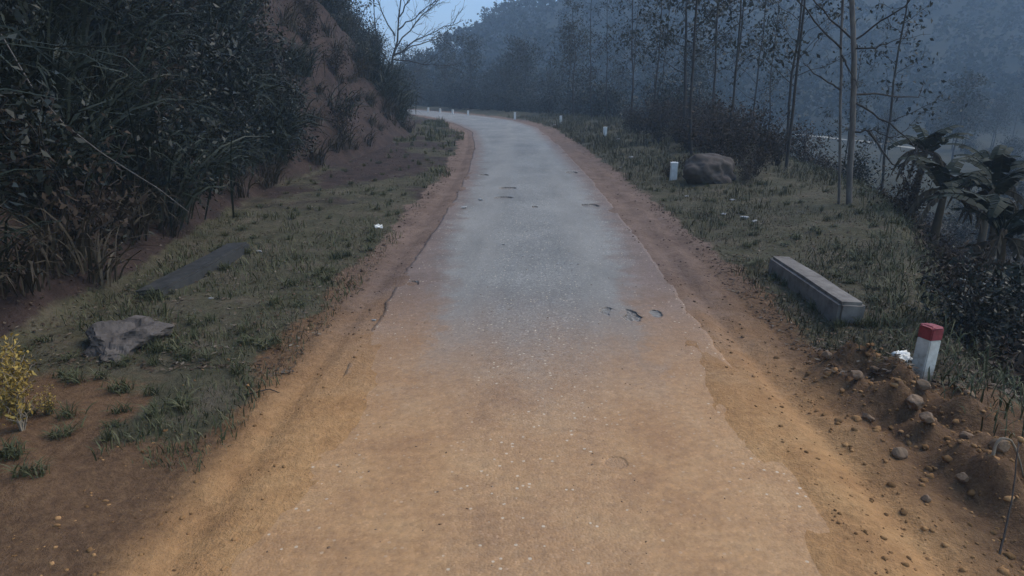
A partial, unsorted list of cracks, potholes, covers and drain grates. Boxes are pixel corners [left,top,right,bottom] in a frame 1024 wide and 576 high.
pothole [609,306,652,325]
